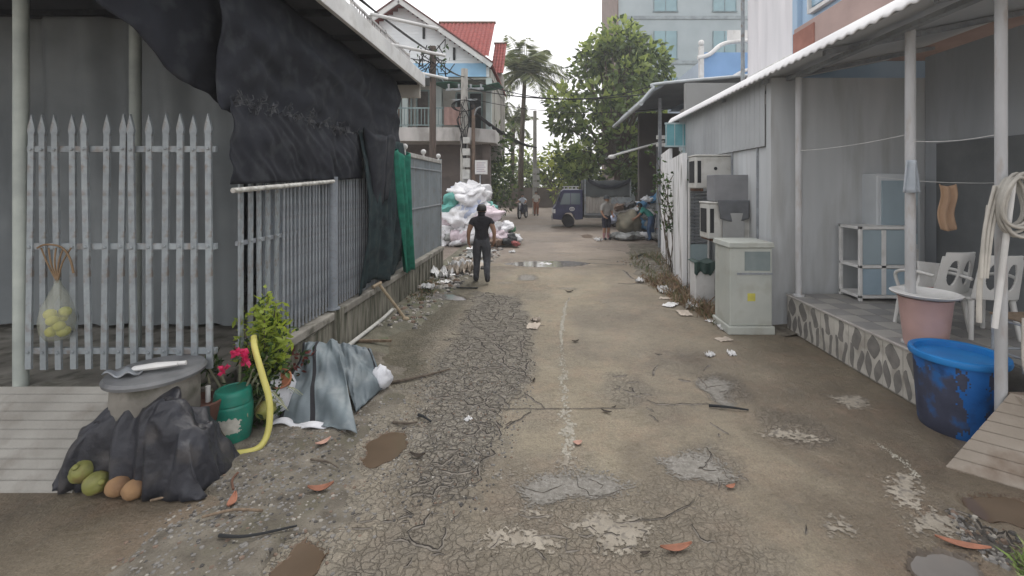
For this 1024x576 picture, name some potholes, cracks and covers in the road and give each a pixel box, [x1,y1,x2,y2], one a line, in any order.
pothole [956,491,1024,529]
crack [352,292,545,568]
pothole [360,429,408,469]
crack [518,422,749,560]
